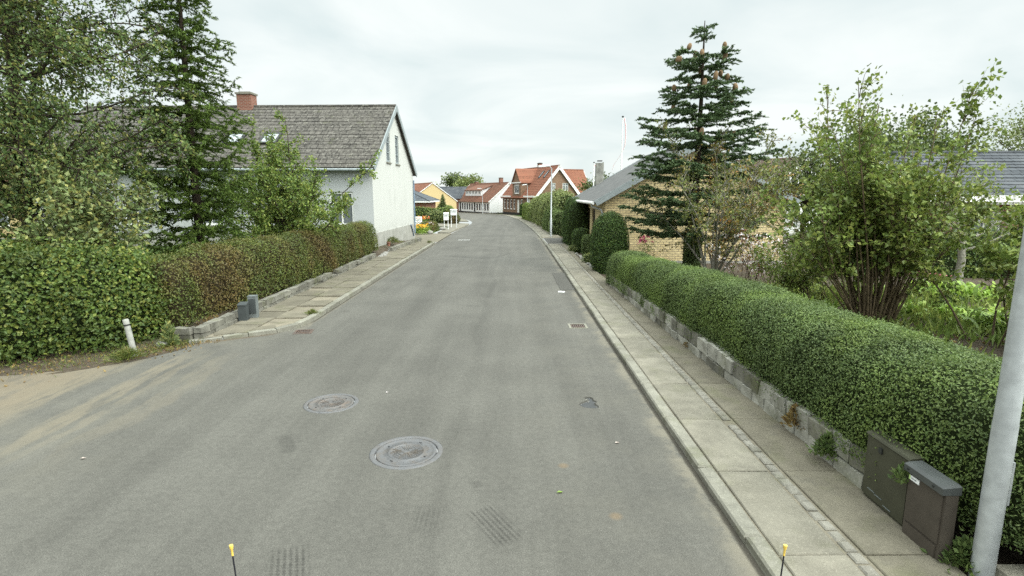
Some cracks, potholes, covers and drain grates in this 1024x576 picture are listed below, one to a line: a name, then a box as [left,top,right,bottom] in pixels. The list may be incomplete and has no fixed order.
pothole [579,397,599,408]
manhole cover [303,393,359,414]
manhole cover [369,436,443,470]
